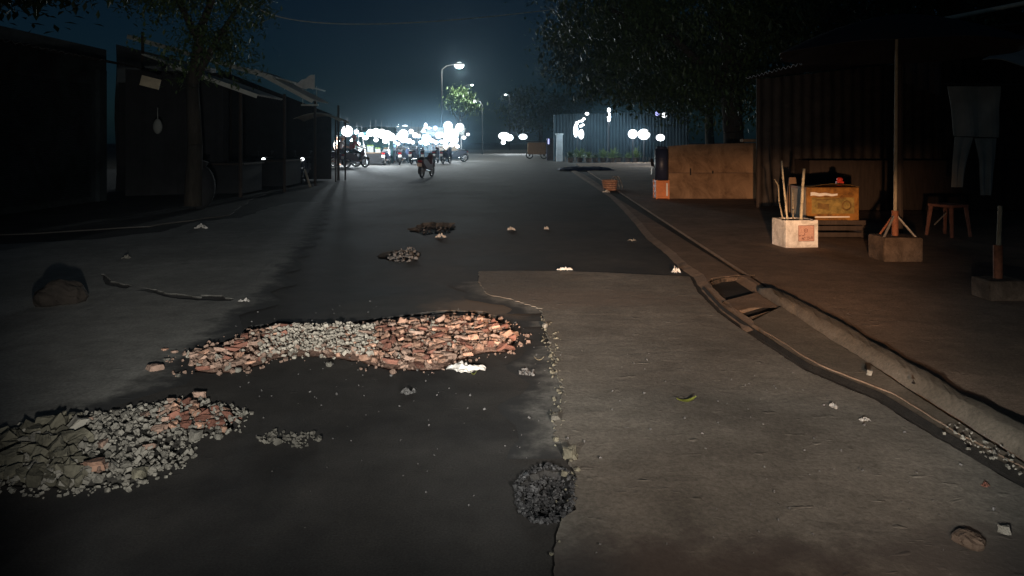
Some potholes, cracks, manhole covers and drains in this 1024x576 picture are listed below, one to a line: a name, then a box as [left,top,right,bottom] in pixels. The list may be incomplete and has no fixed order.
pothole [377,250,421,262]
pothole [407,222,456,236]
pothole [85,407,236,464]
pothole [521,471,570,518]
pothole [201,311,518,349]
